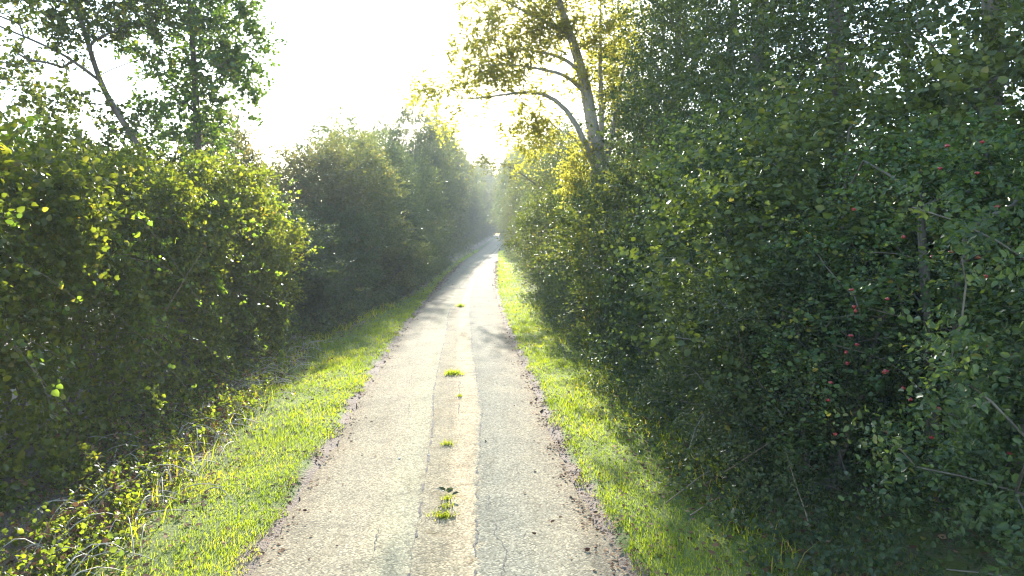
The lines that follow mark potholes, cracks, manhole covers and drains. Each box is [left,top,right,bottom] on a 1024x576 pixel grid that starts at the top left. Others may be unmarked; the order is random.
crack [451,275,533,576]
